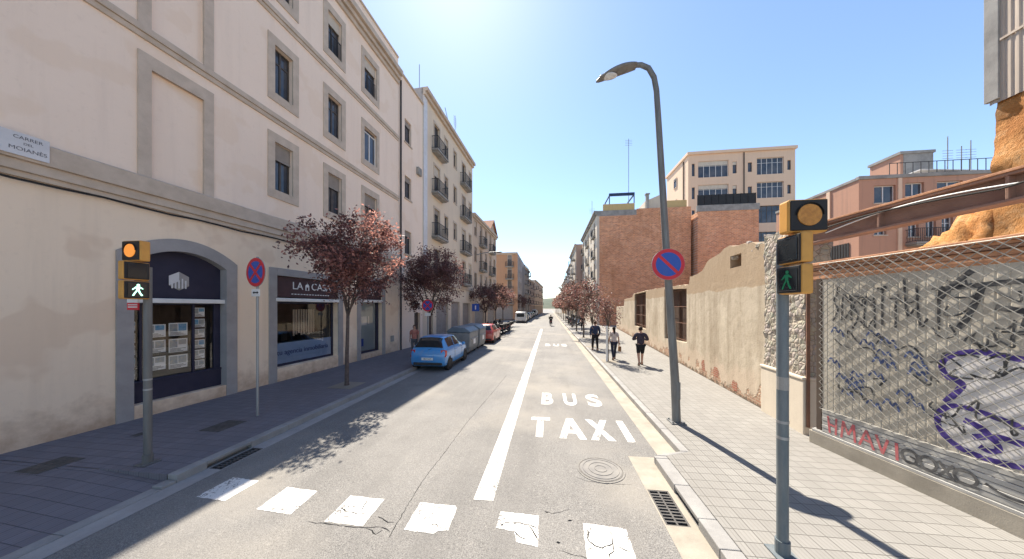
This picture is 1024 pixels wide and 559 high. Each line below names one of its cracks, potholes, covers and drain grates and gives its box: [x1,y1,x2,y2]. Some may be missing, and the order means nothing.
drain grate [209,448,262,469]
manhole cover [577,457,626,484]
crack [559,530,629,559]
drain grate [648,490,691,527]
crack [501,510,565,540]
